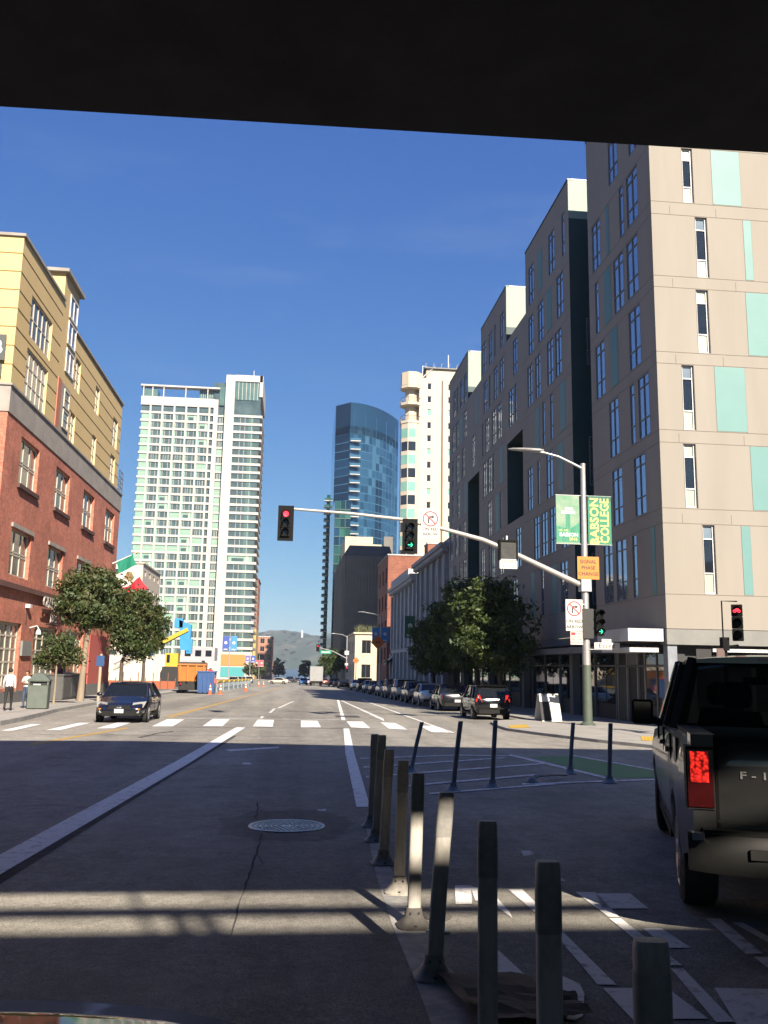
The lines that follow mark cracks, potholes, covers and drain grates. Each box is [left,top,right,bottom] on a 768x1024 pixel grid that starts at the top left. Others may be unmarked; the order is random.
manhole cover [248,819,325,832]
crack [231,801,263,935]
